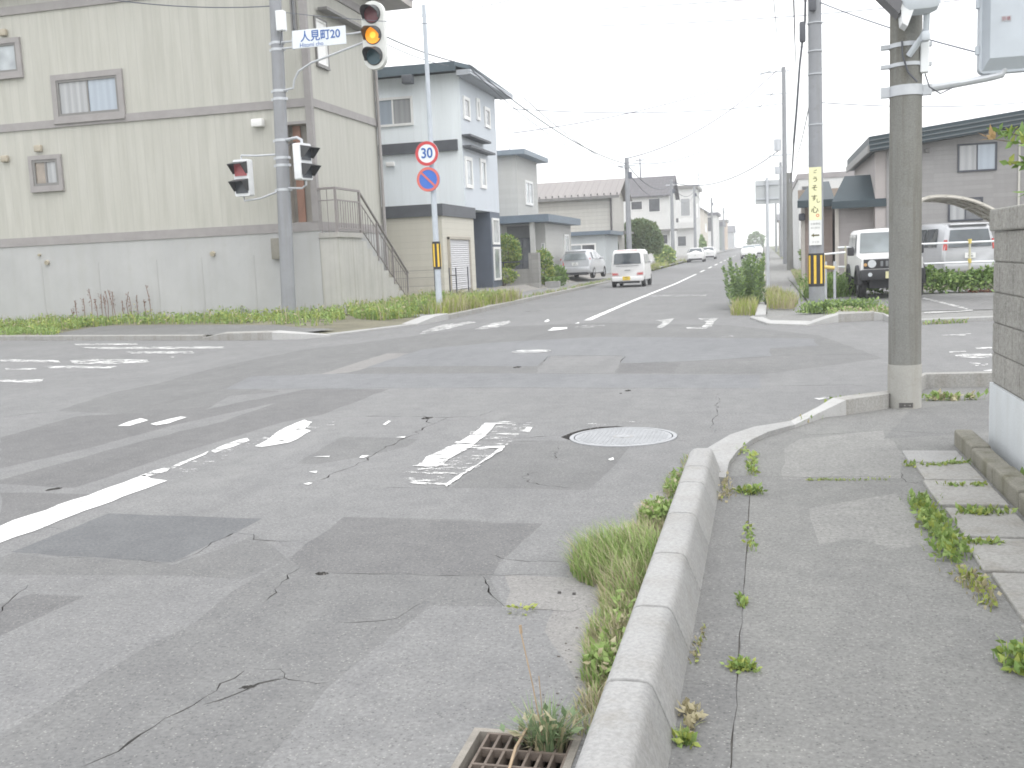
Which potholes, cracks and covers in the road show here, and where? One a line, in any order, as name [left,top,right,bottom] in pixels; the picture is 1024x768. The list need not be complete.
crack [333,554,577,611]
manhole cover [569,427,678,447]
crack [80,668,327,768]
drain grate [451,728,582,768]
